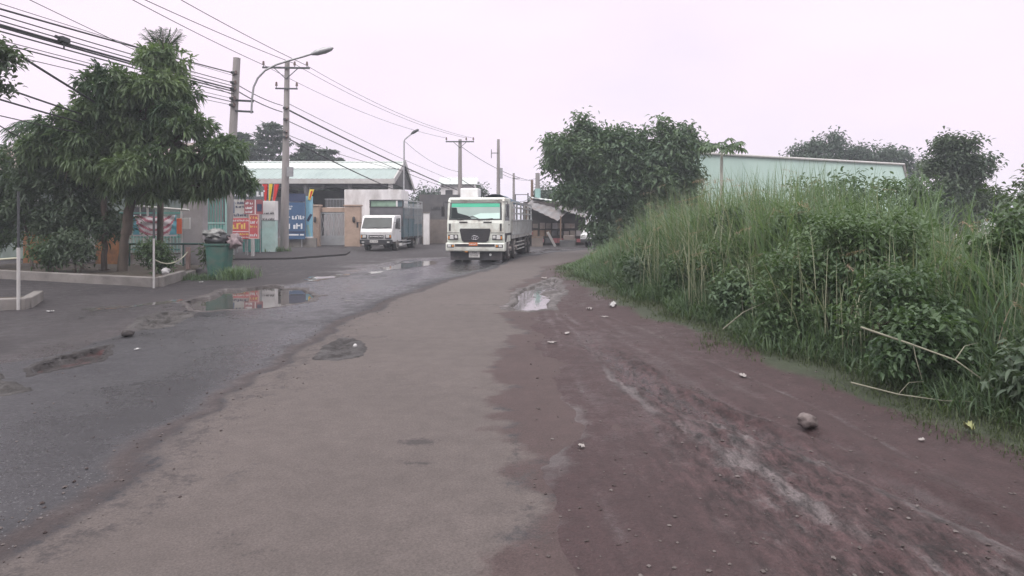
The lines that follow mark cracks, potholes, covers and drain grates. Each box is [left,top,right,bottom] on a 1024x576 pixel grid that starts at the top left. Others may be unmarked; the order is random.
pothole [22,344,115,377]
pothole [311,337,368,361]
pothole [0,373,32,397]
pothole [126,311,199,330]
pothole [180,284,328,312]
pothole [499,277,569,312]
